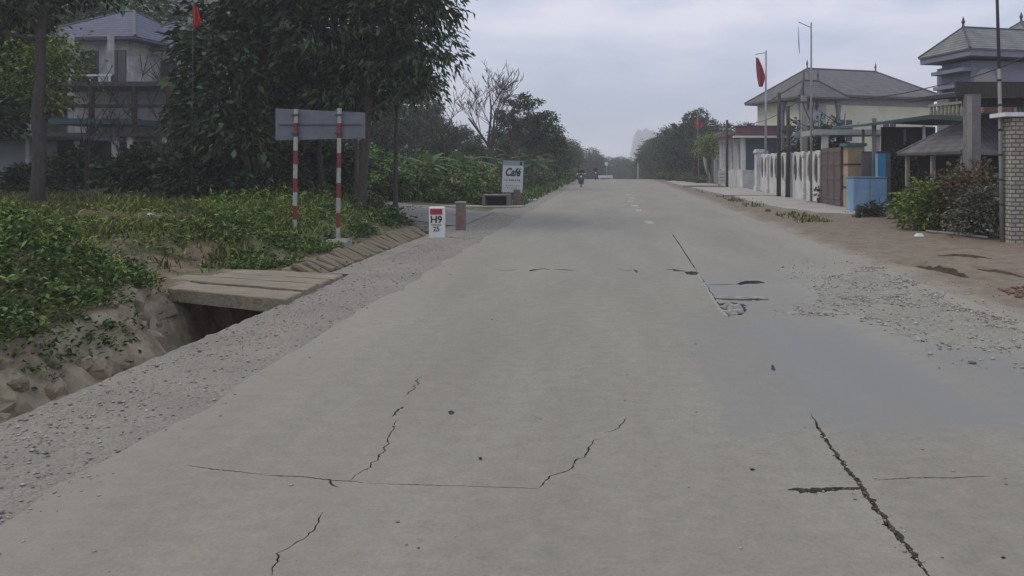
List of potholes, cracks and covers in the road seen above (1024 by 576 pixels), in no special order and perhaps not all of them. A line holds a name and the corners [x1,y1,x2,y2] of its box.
crack [788,414,1007,576]
crack [330,378,625,489]
crack [271,512,323,575]
